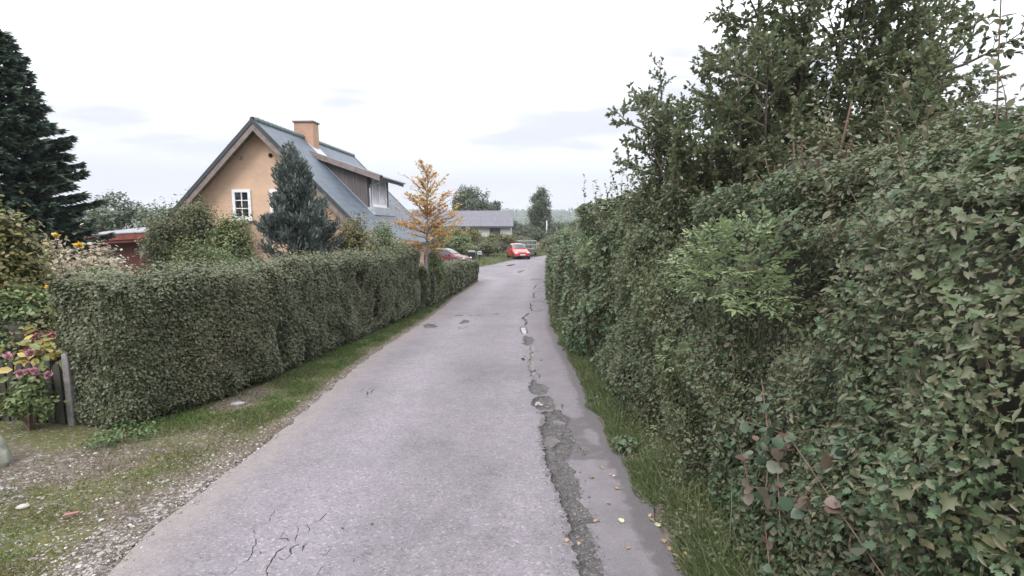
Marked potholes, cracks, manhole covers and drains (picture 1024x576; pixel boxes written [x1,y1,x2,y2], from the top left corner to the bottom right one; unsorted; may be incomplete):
crack [234,510,329,576]
crack [521,284,545,326]
pothole [531,396,556,410]
crack [527,346,541,379]
pothole [528,379,550,395]
